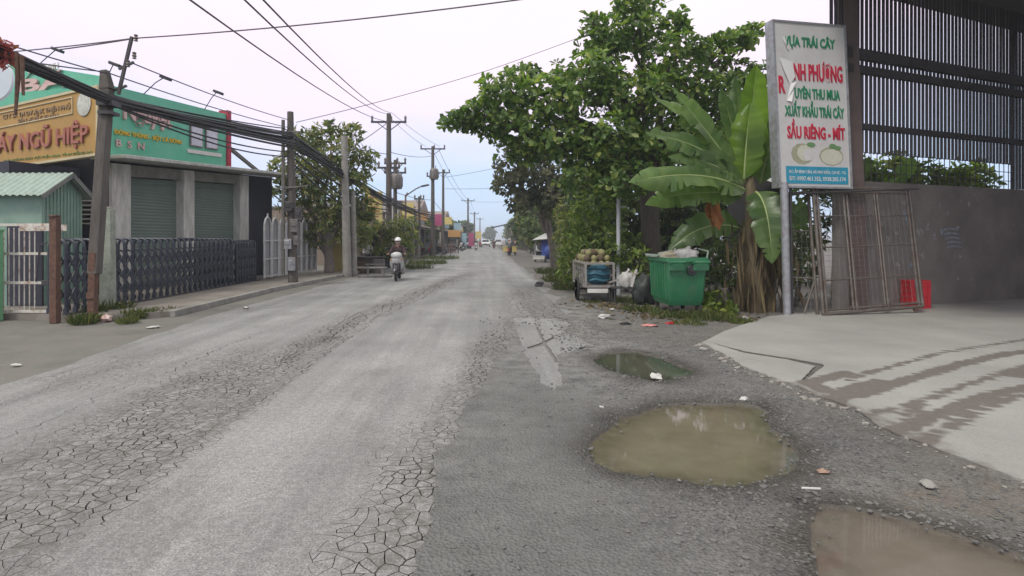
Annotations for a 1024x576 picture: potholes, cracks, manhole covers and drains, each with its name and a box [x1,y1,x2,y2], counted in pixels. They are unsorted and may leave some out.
crack [715,343,824,380]
pothole [587,402,801,486]
crack [308,285,560,576]
pothole [807,504,1024,576]
pothole [593,351,694,381]
crack [0,343,318,576]
